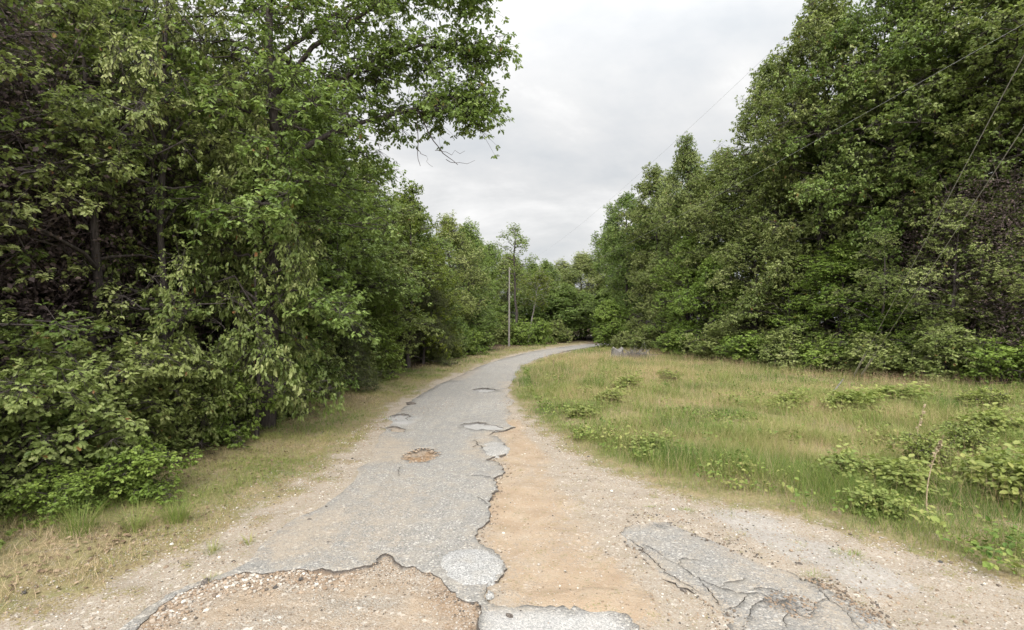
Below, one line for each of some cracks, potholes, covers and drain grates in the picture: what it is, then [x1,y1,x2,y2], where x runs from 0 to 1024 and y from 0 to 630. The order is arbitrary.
crack [633,542,853,622]
pothole [138,554,482,630]
pothole [463,422,503,432]
pothole [402,449,439,462]
